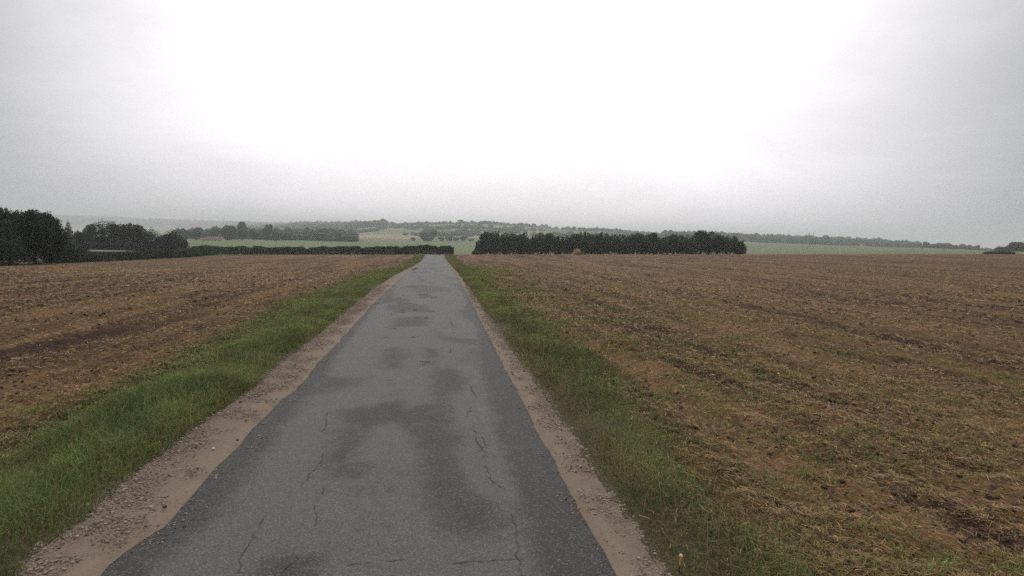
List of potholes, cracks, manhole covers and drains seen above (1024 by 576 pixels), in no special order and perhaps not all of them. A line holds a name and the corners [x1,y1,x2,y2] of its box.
crack [464,387,505,490]
crack [452,508,523,576]
